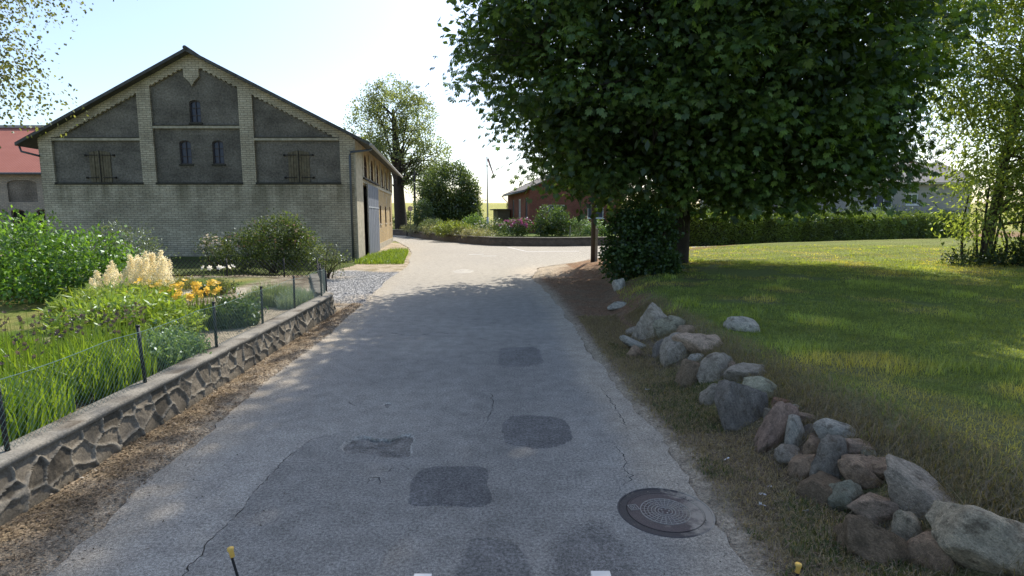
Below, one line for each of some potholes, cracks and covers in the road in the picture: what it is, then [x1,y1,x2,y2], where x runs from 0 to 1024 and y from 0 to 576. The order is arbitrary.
crack [182,433,336,576]
manhole cover [617,488,716,538]
crack [585,391,634,497]
